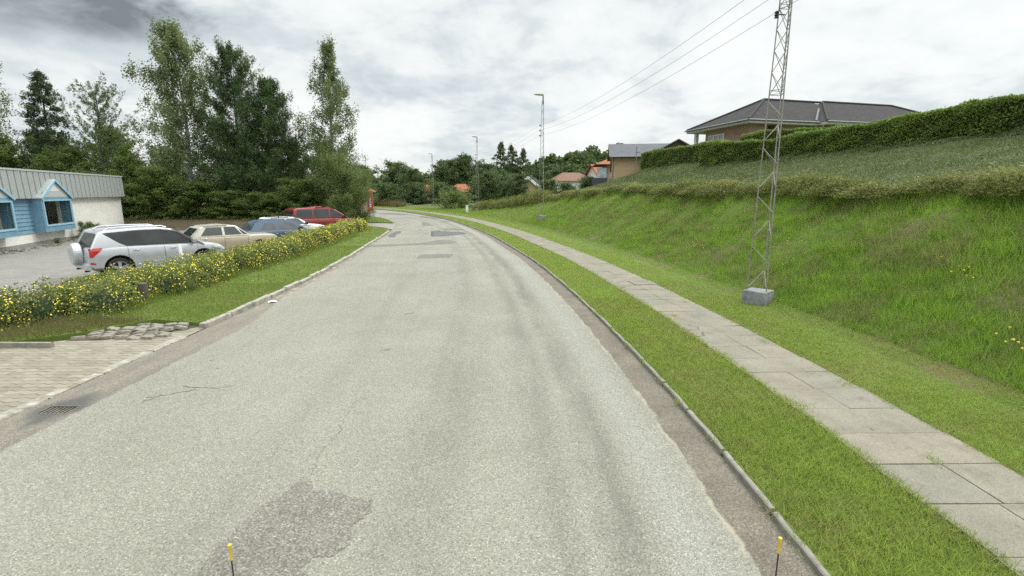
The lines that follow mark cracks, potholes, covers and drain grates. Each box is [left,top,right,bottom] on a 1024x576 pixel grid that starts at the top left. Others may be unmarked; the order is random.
drain grate [35,406,81,414]
